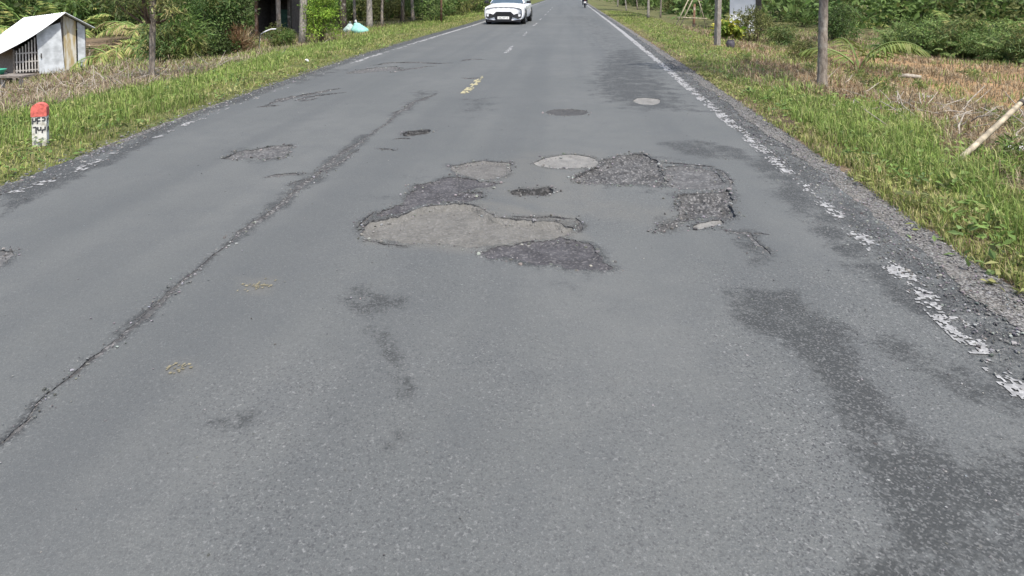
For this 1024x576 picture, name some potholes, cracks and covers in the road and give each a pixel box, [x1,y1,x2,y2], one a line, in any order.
pothole [574,153,668,187]
pothole [224,145,293,159]
pothole [481,237,613,271]
pothole [376,177,499,216]
pothole [0,250,14,266]
crack [260,89,344,107]
pothole [665,166,726,191]
crack [728,231,771,254]
pothole [658,190,736,232]
pothole [510,187,554,196]
